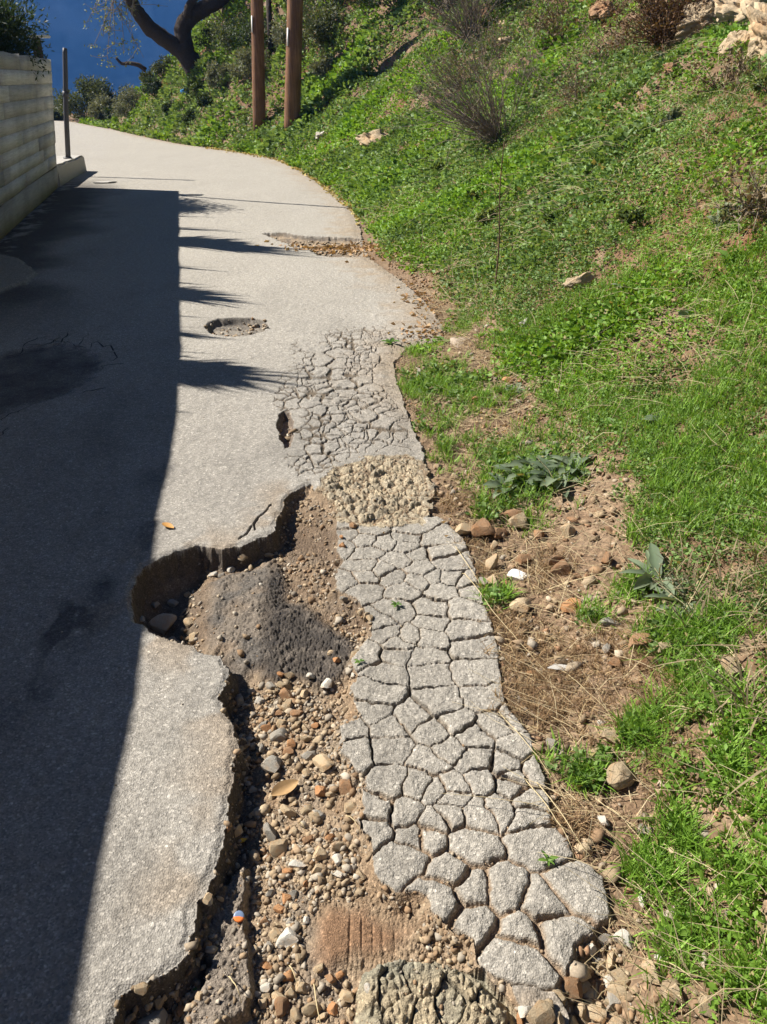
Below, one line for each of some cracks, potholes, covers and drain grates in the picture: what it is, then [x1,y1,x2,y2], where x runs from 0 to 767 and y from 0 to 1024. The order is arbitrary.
crack [338,523,612,992]
crack [240,504,273,539]
pothole [276,411,295,449]
pothole [262,232,365,257]
pothole [113,484,525,1024]
crack [273,325,437,481]
crack [0,333,123,436]
pothole [205,317,269,336]
